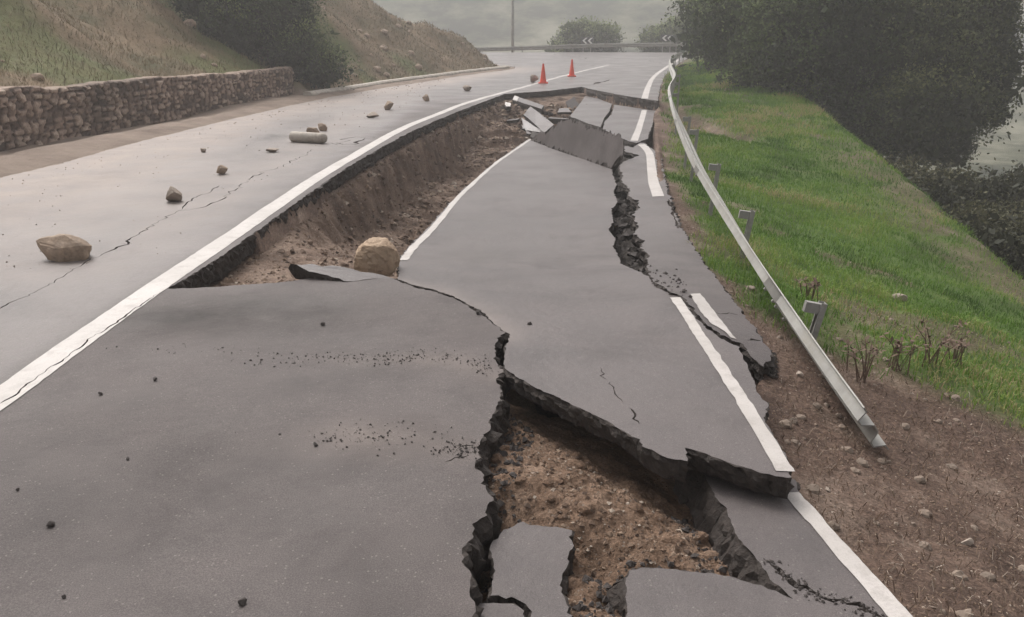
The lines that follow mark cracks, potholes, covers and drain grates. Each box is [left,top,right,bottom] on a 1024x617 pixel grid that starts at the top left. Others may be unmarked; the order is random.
crack [667,199,681,228]
crack [769,562,882,617]
crack [600,368,639,423]
crack [750,338,779,378]
crack [611,156,645,274]
crack [0,149,312,309]
pothole [478,389,730,617]
